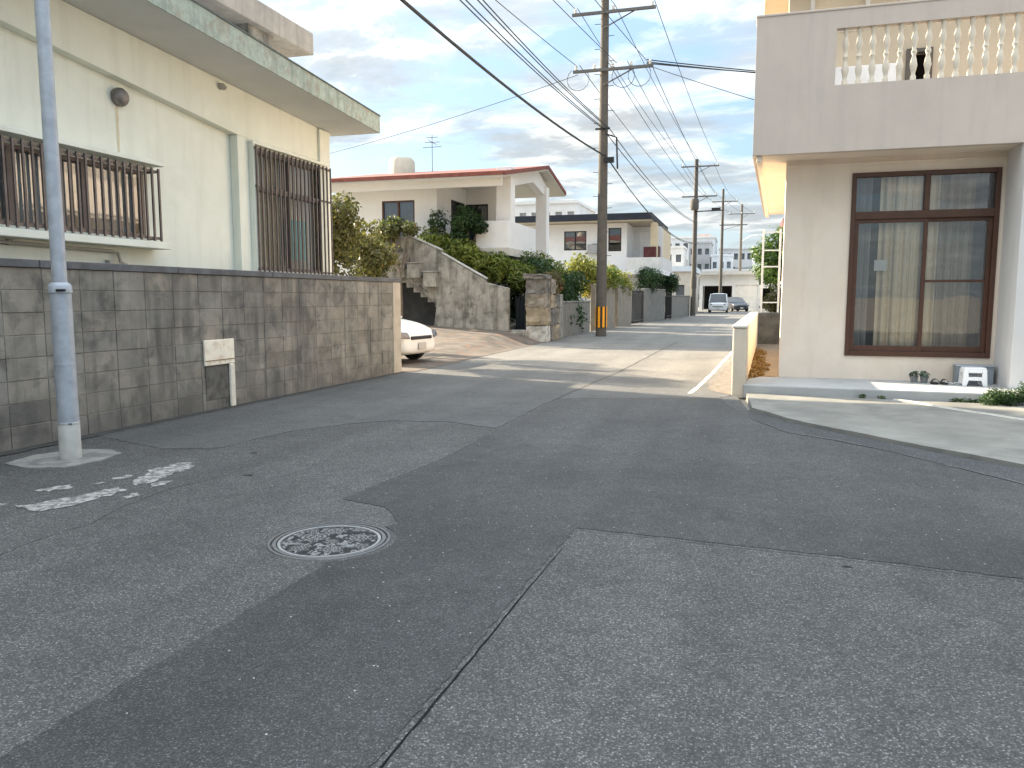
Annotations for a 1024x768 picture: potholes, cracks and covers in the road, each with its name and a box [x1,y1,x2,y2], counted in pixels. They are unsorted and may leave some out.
manhole cover [267,522,391,561]
